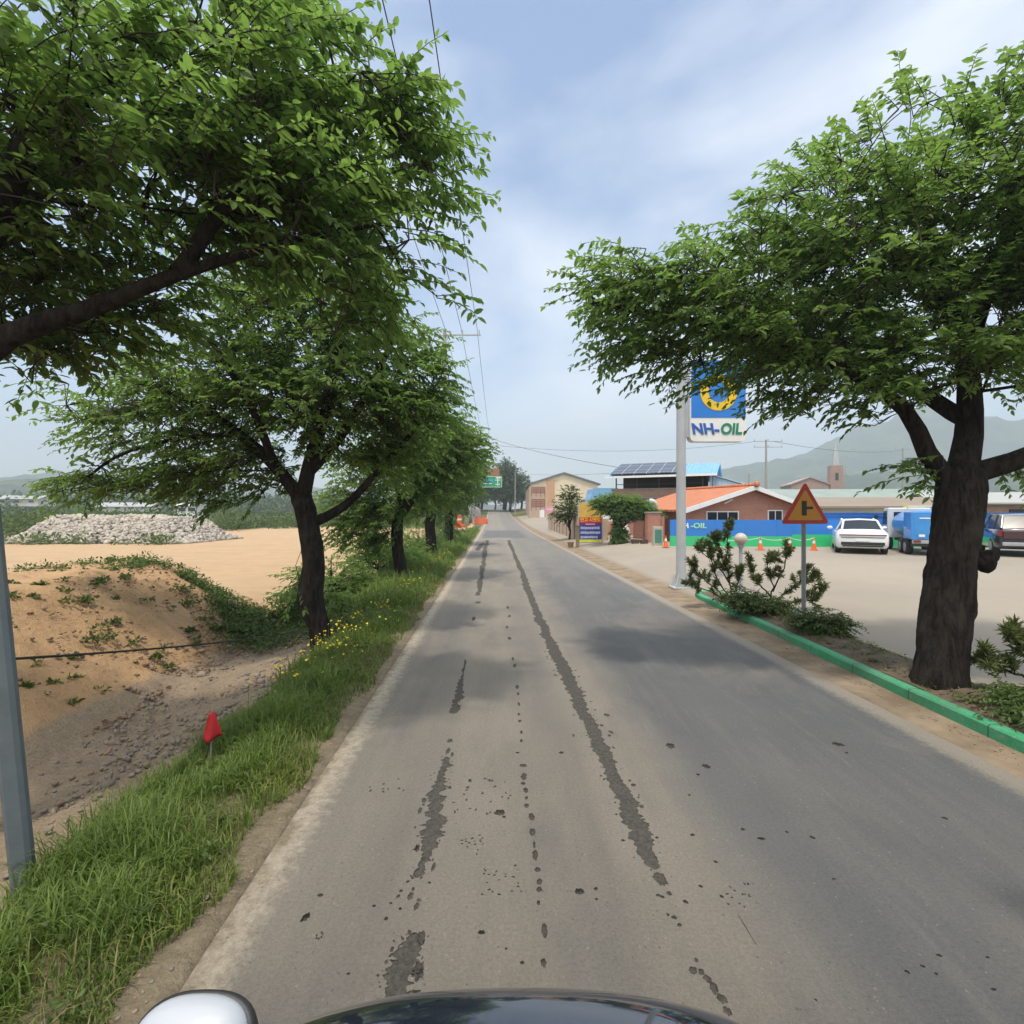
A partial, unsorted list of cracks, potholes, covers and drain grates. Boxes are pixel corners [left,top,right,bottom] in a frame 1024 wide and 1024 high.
crack [369,606,548,968]
crack [726,883,757,945]
